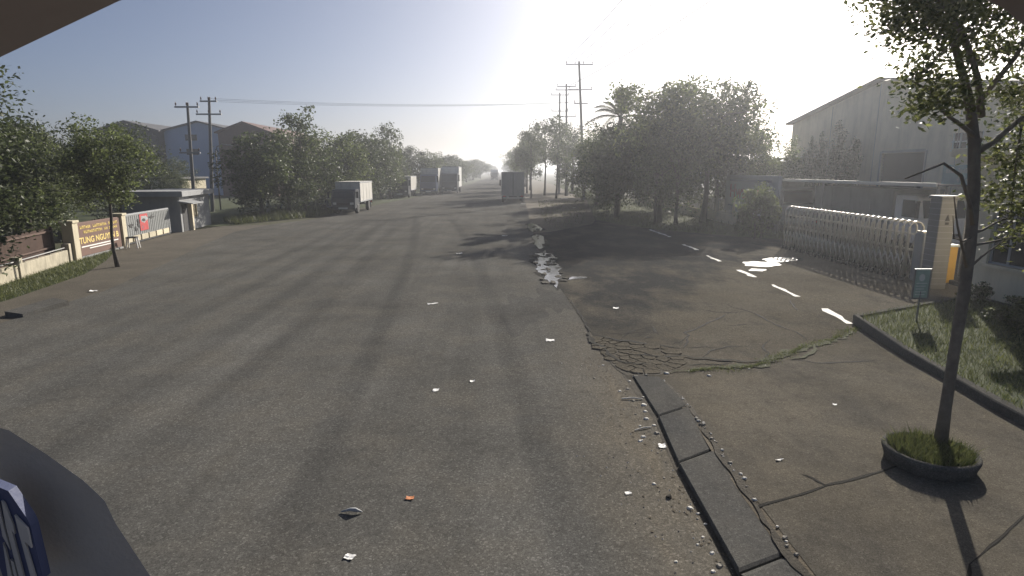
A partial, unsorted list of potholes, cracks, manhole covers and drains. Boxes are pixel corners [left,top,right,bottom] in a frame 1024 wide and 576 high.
crack [569,299,876,372]
